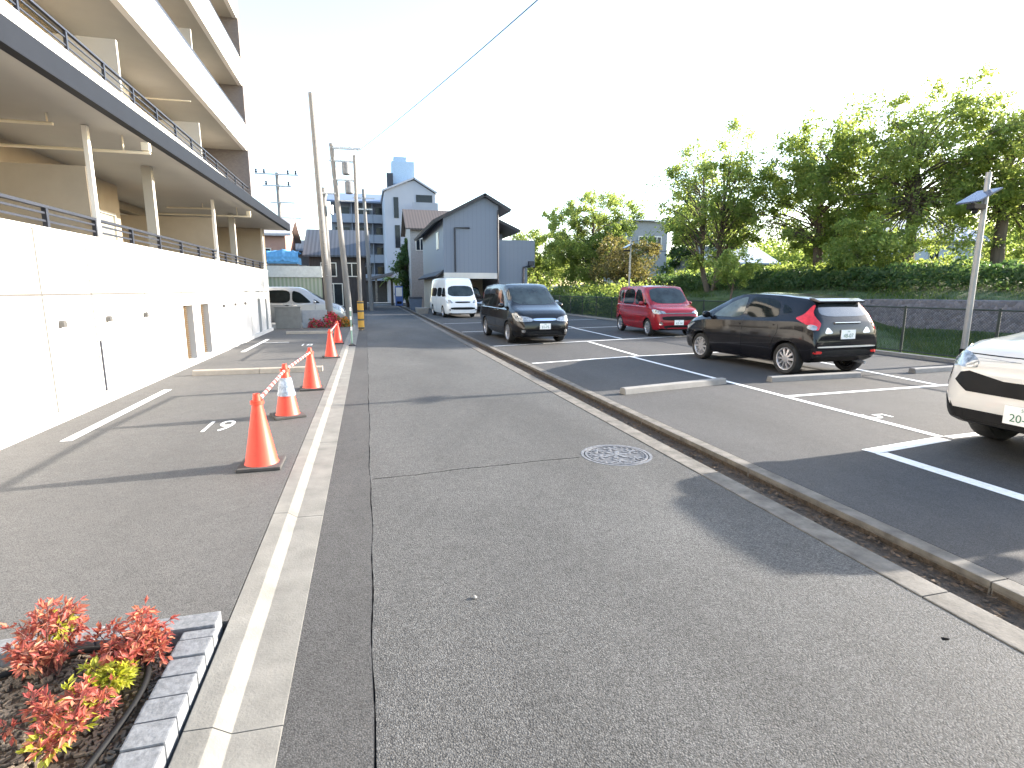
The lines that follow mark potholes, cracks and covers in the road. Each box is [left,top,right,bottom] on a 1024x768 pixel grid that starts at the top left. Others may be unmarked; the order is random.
manhole cover [581,445,652,466]
